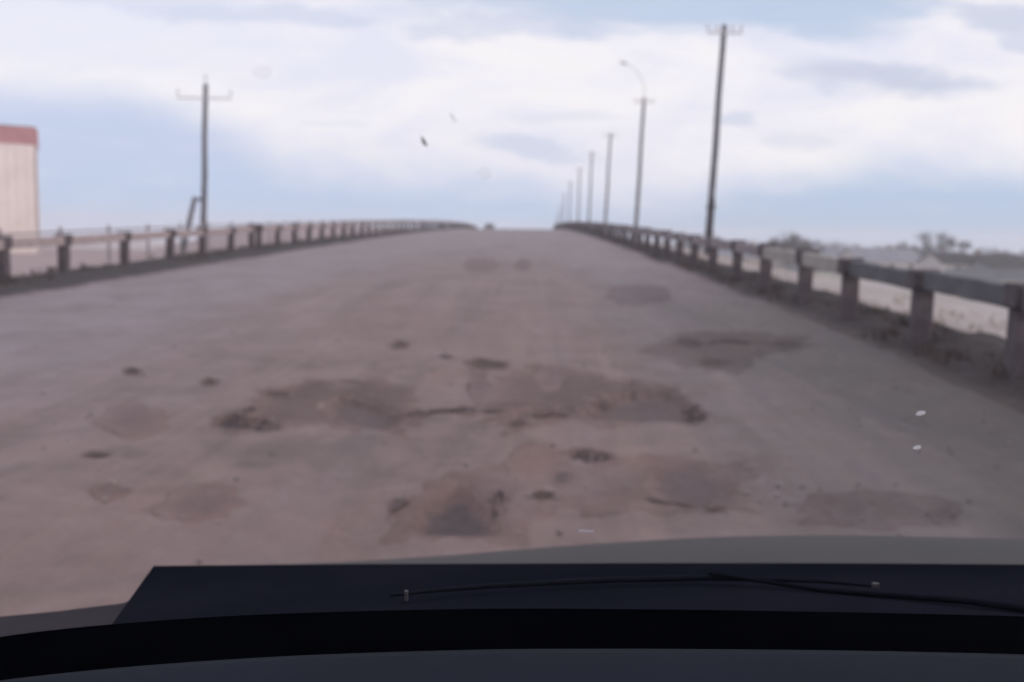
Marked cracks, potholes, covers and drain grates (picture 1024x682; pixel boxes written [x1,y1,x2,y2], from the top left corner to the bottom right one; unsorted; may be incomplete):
pothole [510,419,526,429]
pothole [407,482,507,538]
pothole [123,367,141,376]
pothole [390,340,411,350]
pothole [567,447,615,463]
pothole [584,391,705,423]
pothole [463,357,511,370]
pothole [320,395,408,430]
pothole [262,389,293,399]
pothole [211,412,282,432]
